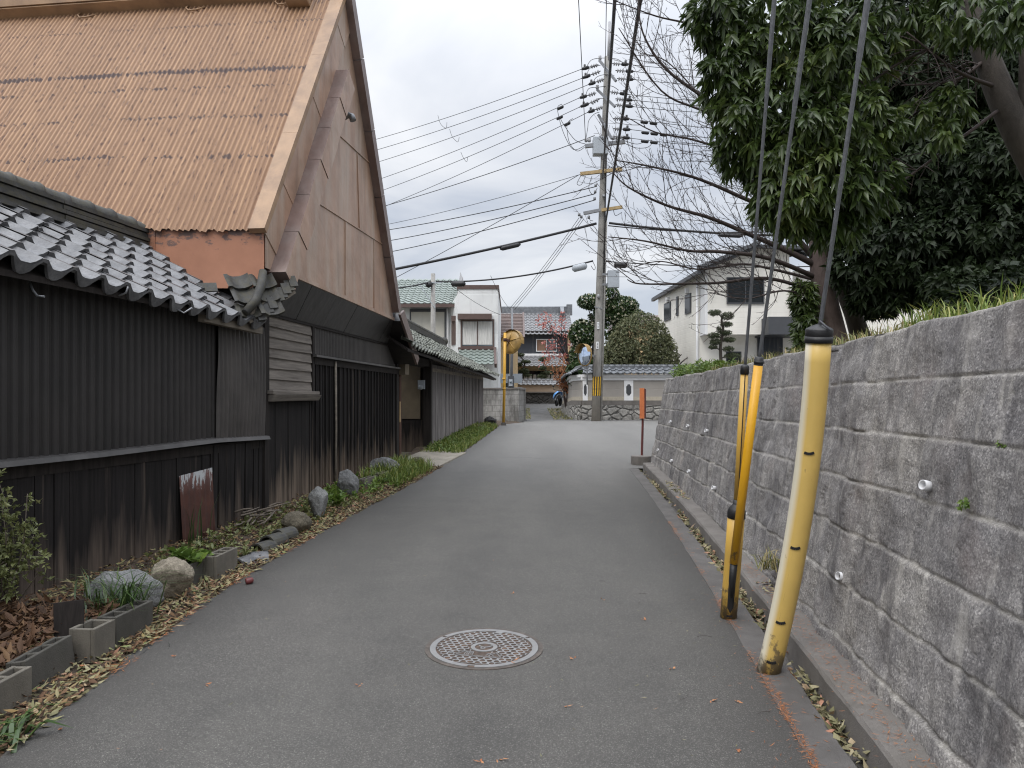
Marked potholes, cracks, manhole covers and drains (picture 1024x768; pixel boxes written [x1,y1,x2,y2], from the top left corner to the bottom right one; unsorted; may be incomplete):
manhole cover [425,628,543,670]
